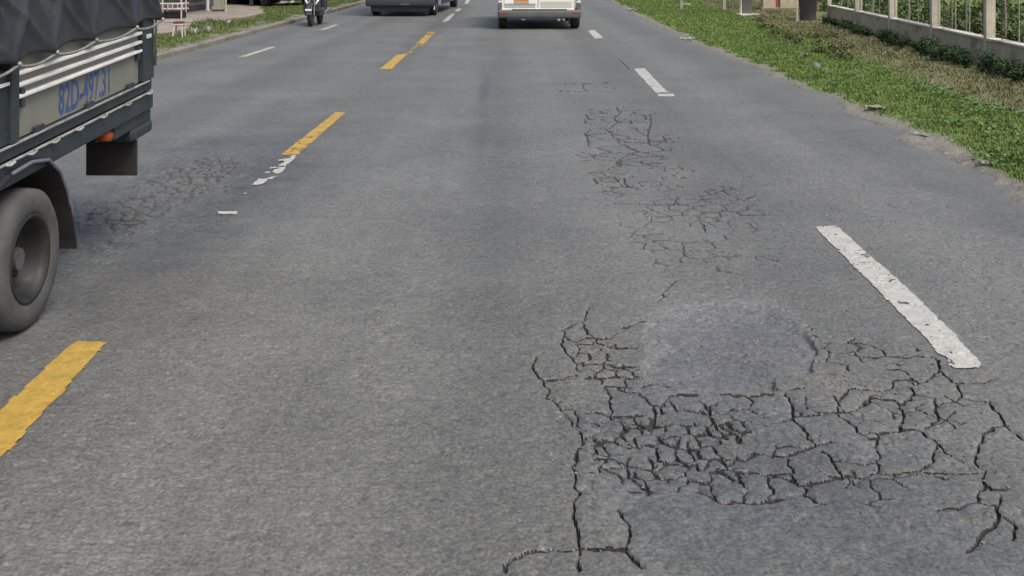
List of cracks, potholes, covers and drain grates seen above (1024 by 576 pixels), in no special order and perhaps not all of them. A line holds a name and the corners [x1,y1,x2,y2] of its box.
crack [559,59,785,273]
crack [503,308,1023,574]
crack [84,157,244,246]
